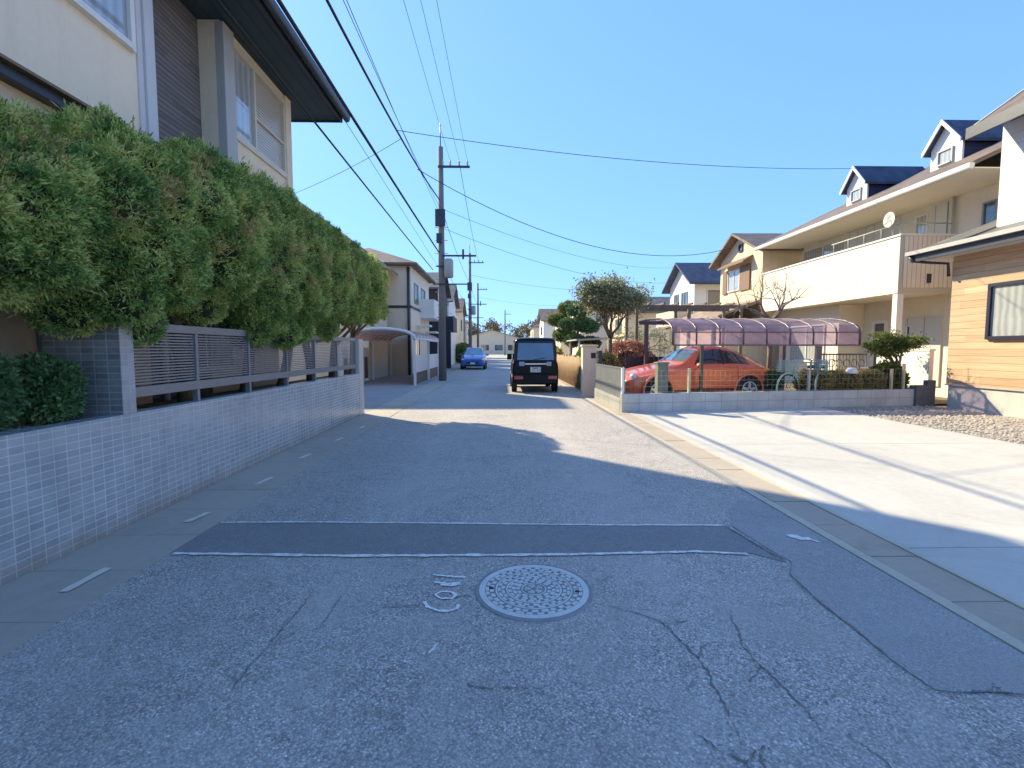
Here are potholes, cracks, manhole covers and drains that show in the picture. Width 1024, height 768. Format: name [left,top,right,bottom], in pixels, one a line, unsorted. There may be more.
crack [730,611,828,738]
manhole cover [475,564,593,622]
crack [213,590,345,711]
crack [600,603,770,768]
